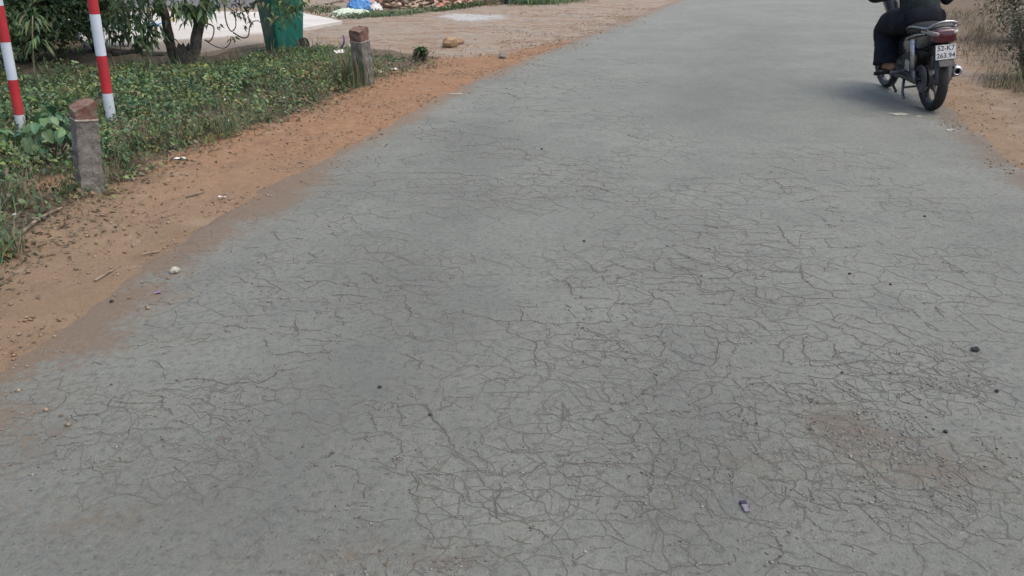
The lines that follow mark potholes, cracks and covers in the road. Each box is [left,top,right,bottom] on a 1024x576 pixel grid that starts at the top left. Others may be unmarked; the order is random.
crack [414,413,739,576]
crack [683,145,996,259]
crack [575,173,799,275]
crack [351,250,670,416]
crack [575,424,1016,576]
crack [666,243,1024,402]
crack [144,207,464,394]
crack [31,282,212,391]
crack [234,446,578,576]
crack [62,344,400,507]
crack [259,127,561,265]
crack [474,80,706,210]
